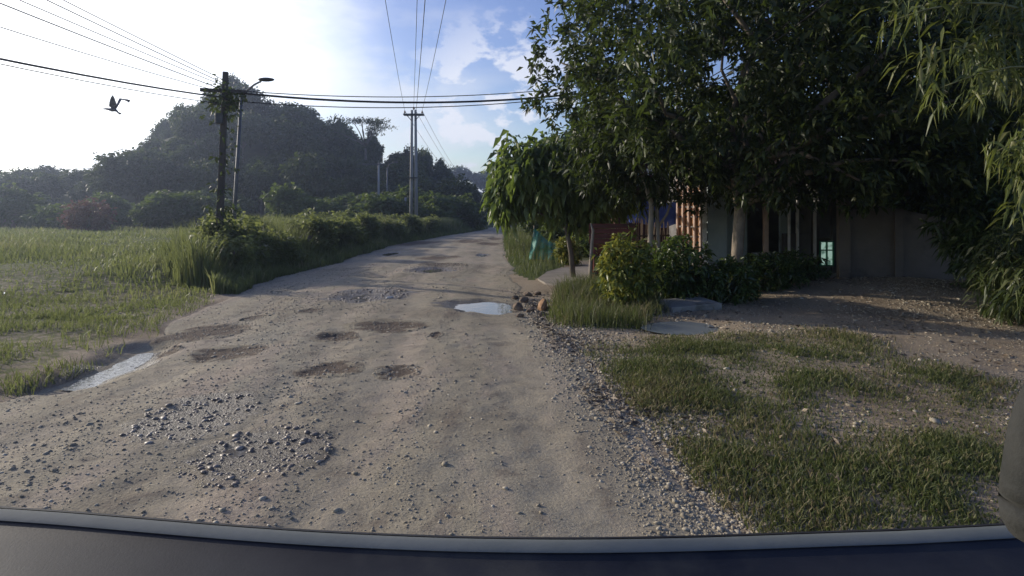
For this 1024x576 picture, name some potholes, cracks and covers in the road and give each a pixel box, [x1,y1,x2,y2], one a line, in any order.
pothole [173,424,340,488]
pothole [372,364,424,381]
pothole [293,360,366,379]
pothole [428,297,524,317]
pothole [318,287,420,304]
pothole [112,388,272,450]
pothole [183,344,270,363]
pothole [310,331,360,342]
pothole [341,318,433,334]
pothole [404,266,459,274]
